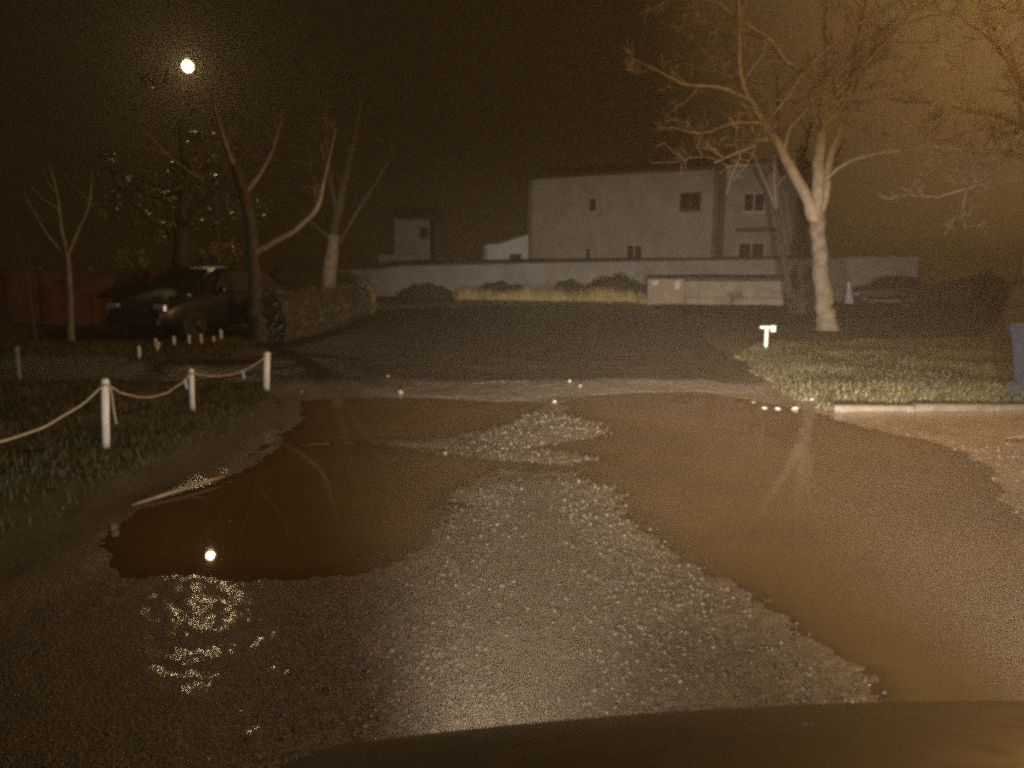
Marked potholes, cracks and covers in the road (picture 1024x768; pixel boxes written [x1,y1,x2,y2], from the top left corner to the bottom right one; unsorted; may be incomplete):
pothole [519,390,1024,702]
pothole [271,396,556,448]
pothole [89,443,526,587]
